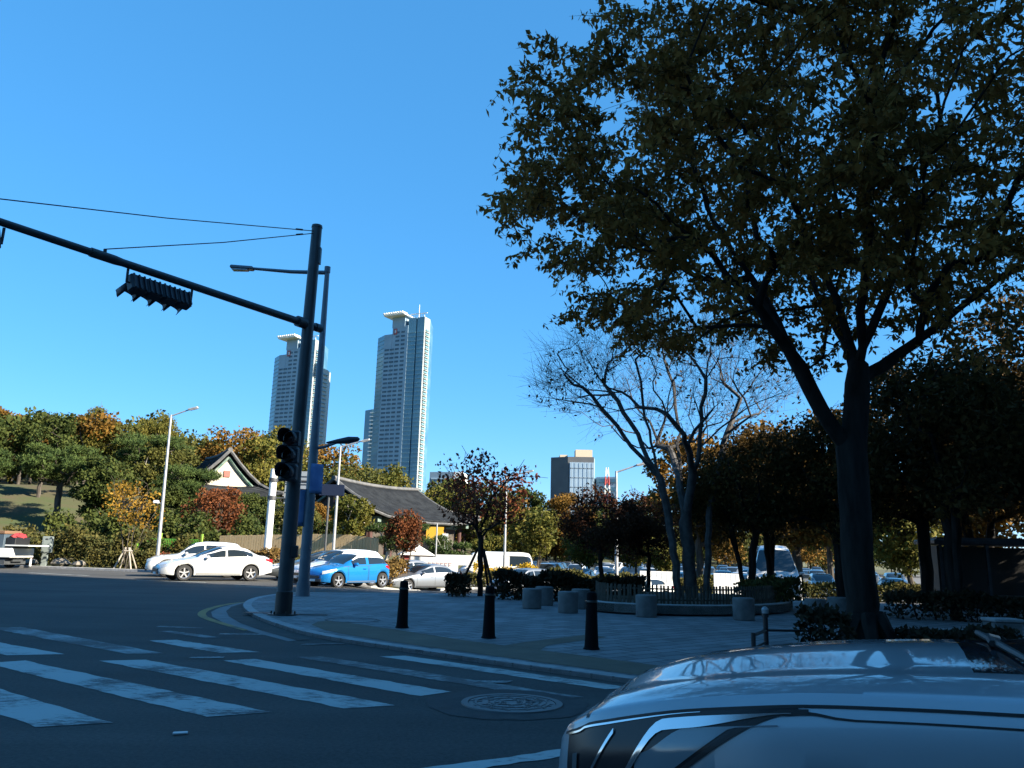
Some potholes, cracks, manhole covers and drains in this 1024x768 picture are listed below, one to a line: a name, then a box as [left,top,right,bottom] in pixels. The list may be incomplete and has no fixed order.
manhole cover [425,689,589,720]
